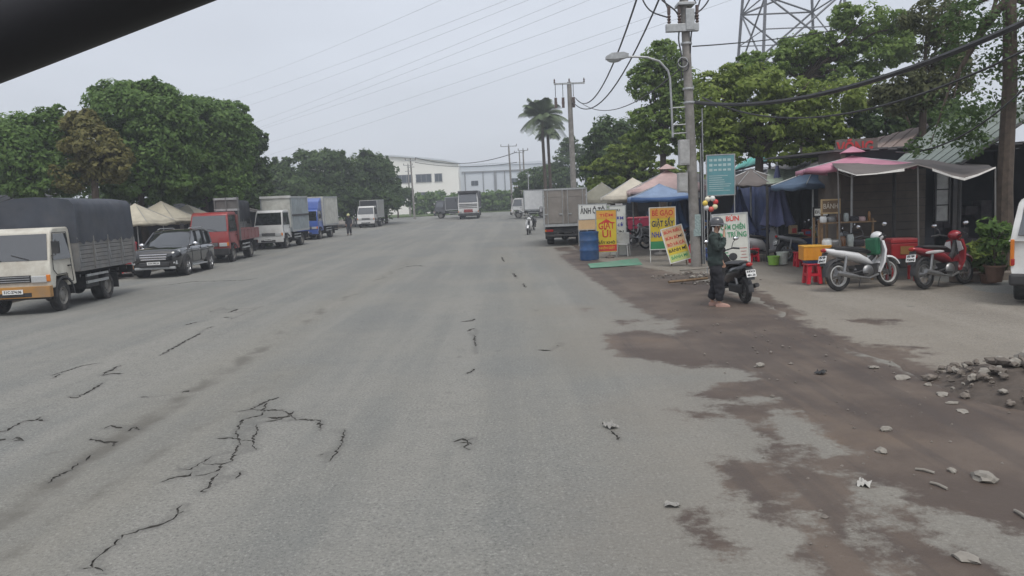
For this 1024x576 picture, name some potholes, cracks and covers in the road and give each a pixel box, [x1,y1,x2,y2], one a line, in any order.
crack [0,417,43,441]
crack [162,397,323,492]
crack [48,425,140,483]
crack [160,309,238,356]
crack [54,364,121,398]
crack [83,505,183,571]
